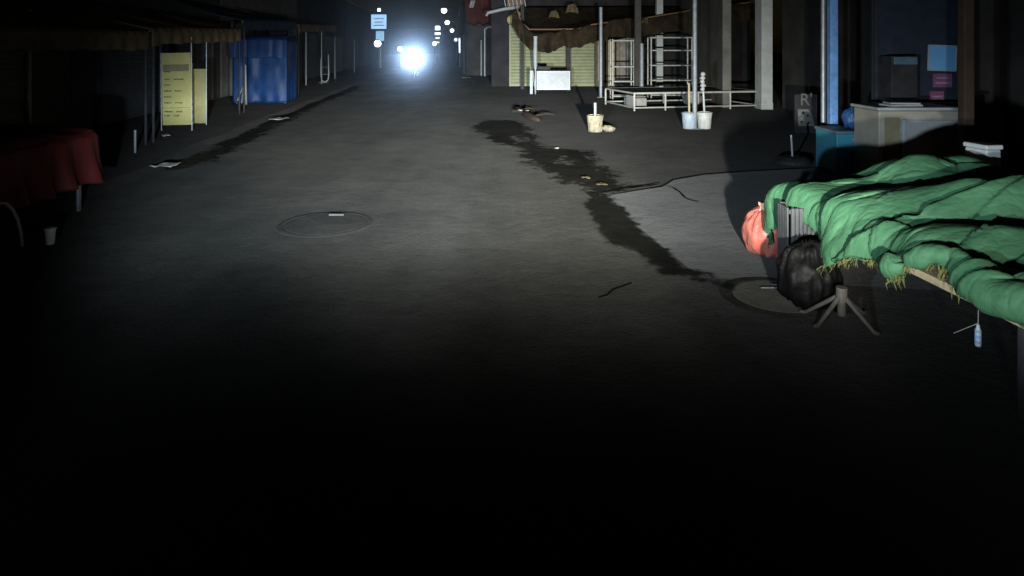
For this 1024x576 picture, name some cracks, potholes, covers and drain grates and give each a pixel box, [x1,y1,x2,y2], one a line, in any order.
crack [597,183,699,202]
manhole cover [276,212,373,238]
manhole cover [719,277,837,319]
